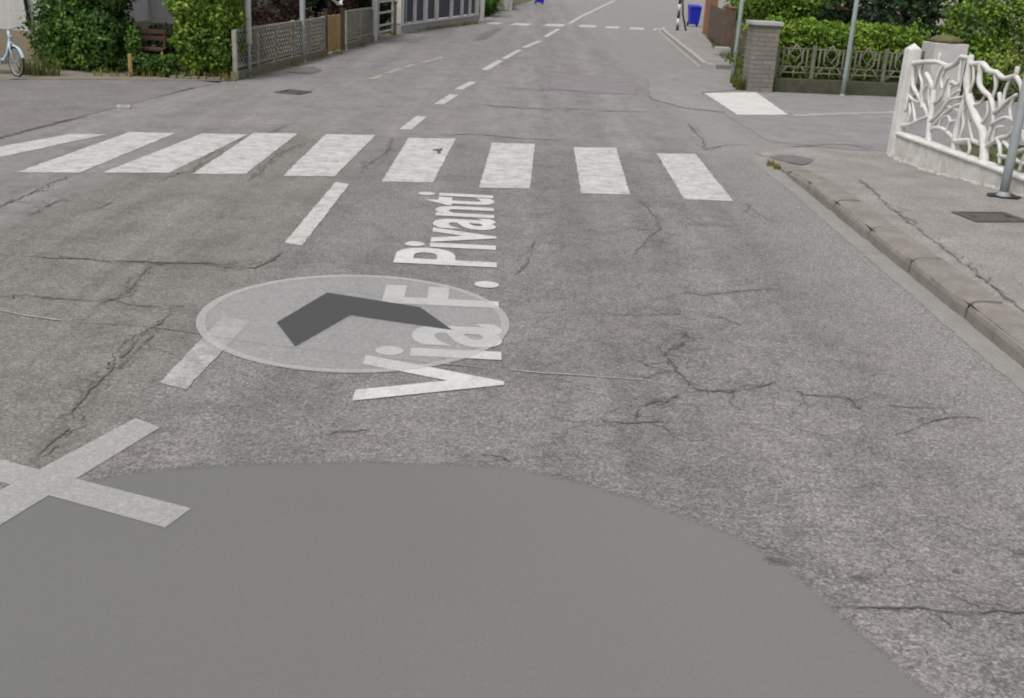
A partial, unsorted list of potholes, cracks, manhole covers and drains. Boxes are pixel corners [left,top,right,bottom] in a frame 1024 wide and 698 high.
crack [793,388,979,435]
crack [0,251,282,462]
crack [630,197,688,256]
crack [560,313,781,435]
manhole cover [951,211,1024,223]
crack [686,123,751,151]
crack [831,592,1024,633]
crack [671,287,780,325]
crack [510,240,535,276]
